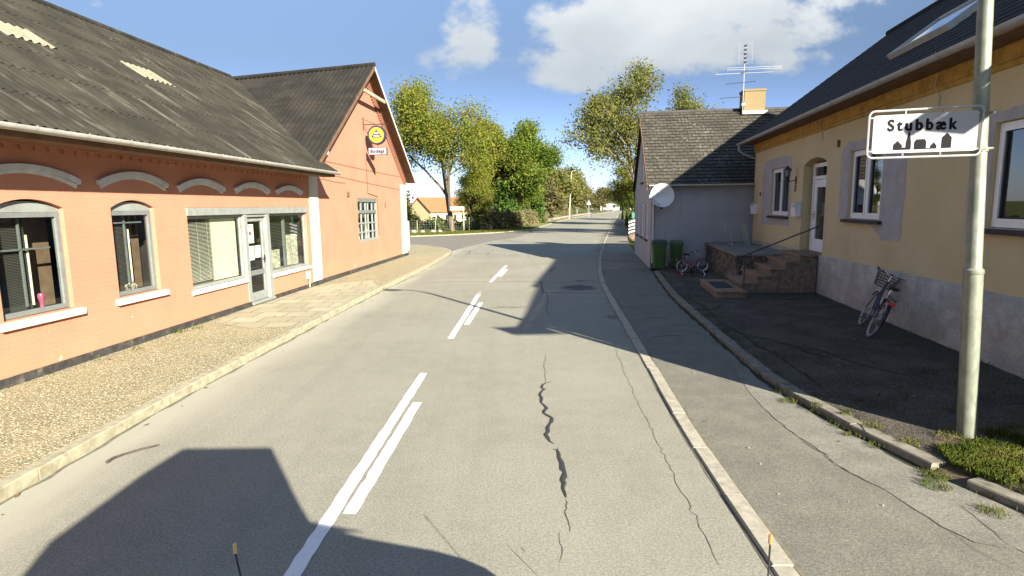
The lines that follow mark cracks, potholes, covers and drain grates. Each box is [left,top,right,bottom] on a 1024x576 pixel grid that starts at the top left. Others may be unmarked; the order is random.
crack [760,404,1019,571]
